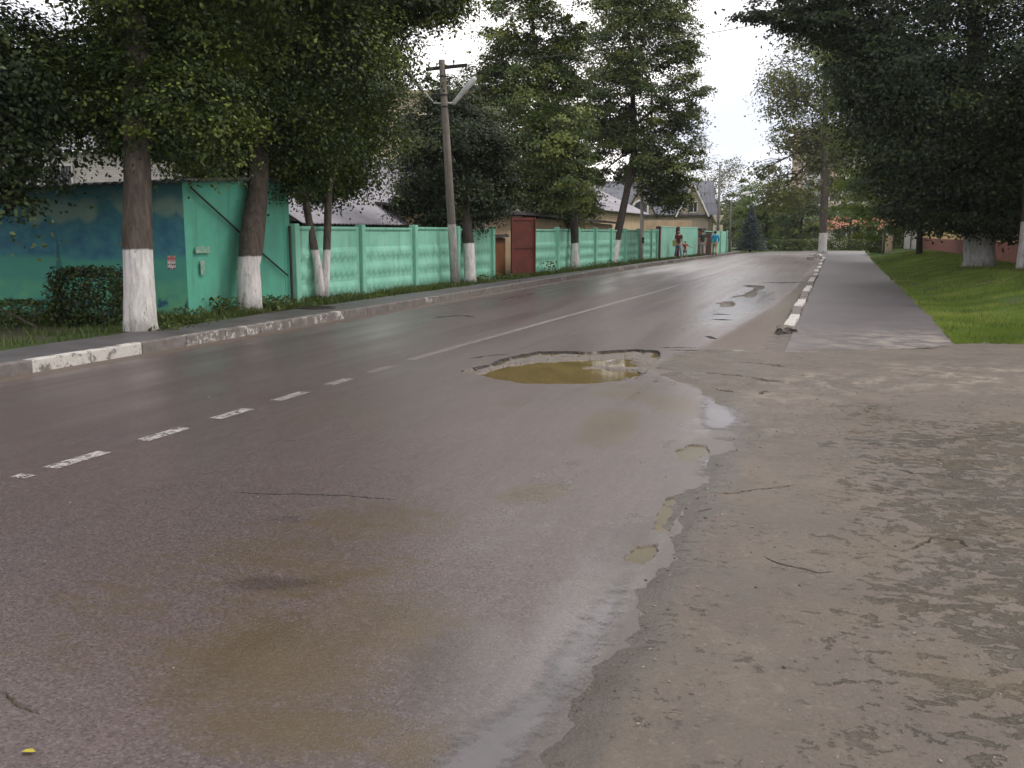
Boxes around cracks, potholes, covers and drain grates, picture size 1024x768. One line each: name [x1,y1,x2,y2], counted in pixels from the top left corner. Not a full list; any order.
pothole [674,444,711,459]
crack [235,492,396,500]
pothole [622,543,659,565]
crack [902,537,971,552]
crack [764,556,835,573]
crack [0,690,40,715]
pothole [651,494,681,533]
pothole [732,285,765,298]
pothole [461,349,661,384]
